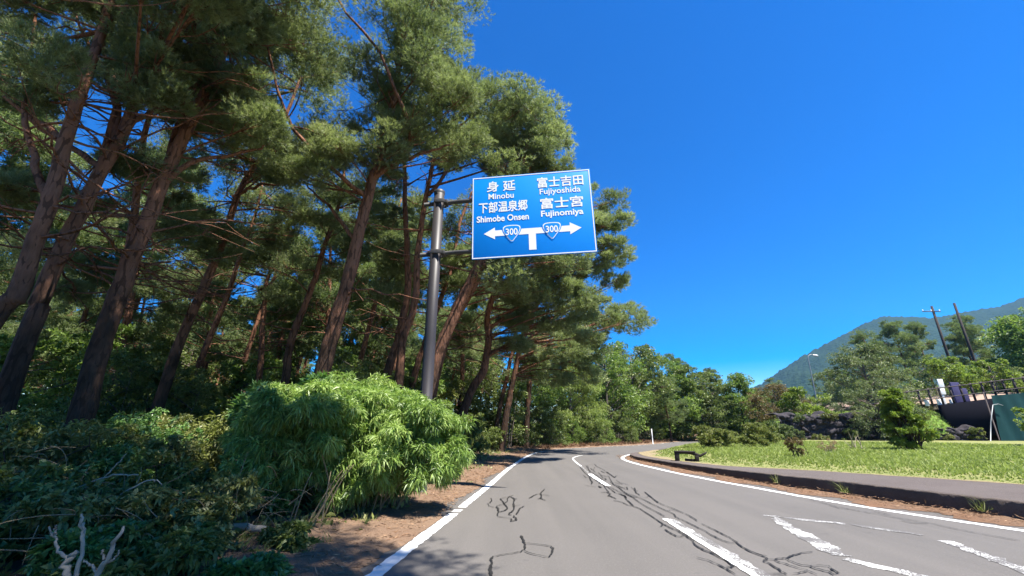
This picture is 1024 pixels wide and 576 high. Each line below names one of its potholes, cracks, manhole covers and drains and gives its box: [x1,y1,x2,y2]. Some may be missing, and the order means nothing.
crack [580,465,840,574]
crack [487,489,554,576]
